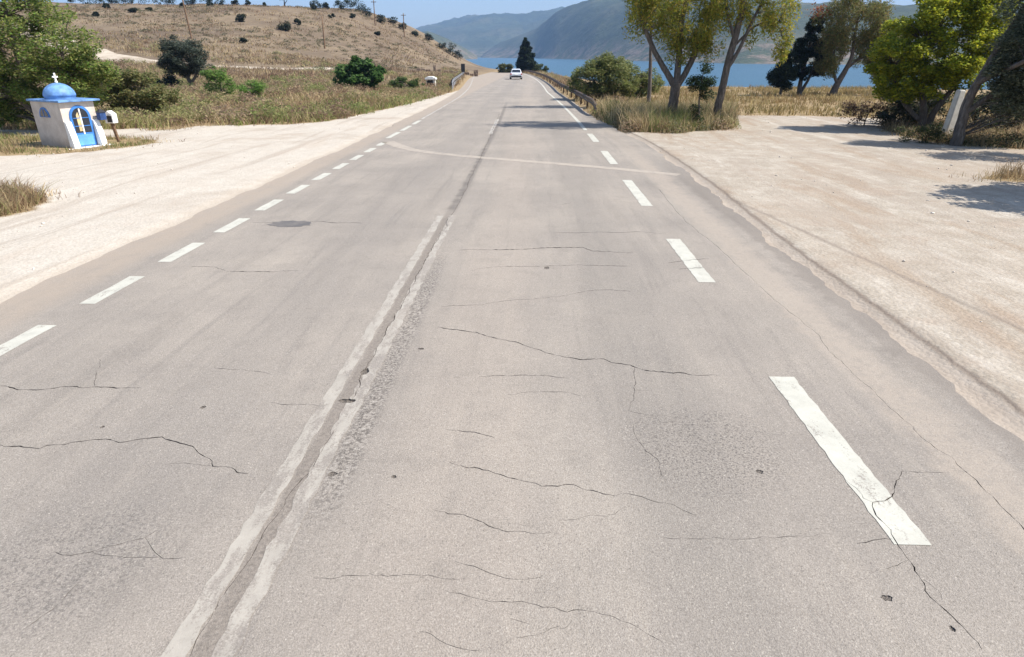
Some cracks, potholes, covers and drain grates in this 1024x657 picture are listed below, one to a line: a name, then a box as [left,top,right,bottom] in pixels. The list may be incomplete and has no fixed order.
crack [471,232,650,269]
crack [450,462,694,521]
crack [325,561,663,643]
crack [439,511,544,534]
crack [8,359,132,390]
crack [441,327,719,415]
crack [2,437,248,474]
crack [55,533,178,559]
crack [667,200,1024,648]
